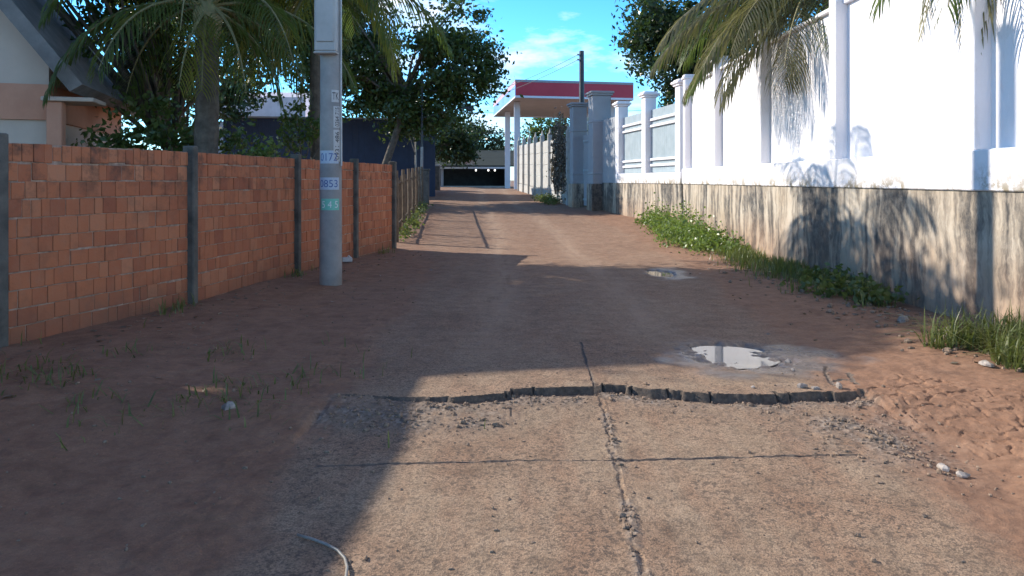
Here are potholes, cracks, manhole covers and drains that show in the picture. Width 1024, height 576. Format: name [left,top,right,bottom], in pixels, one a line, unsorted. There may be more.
crack [314,342,867,576]
pothole [668,340,804,375]
pothole [642,268,679,279]
